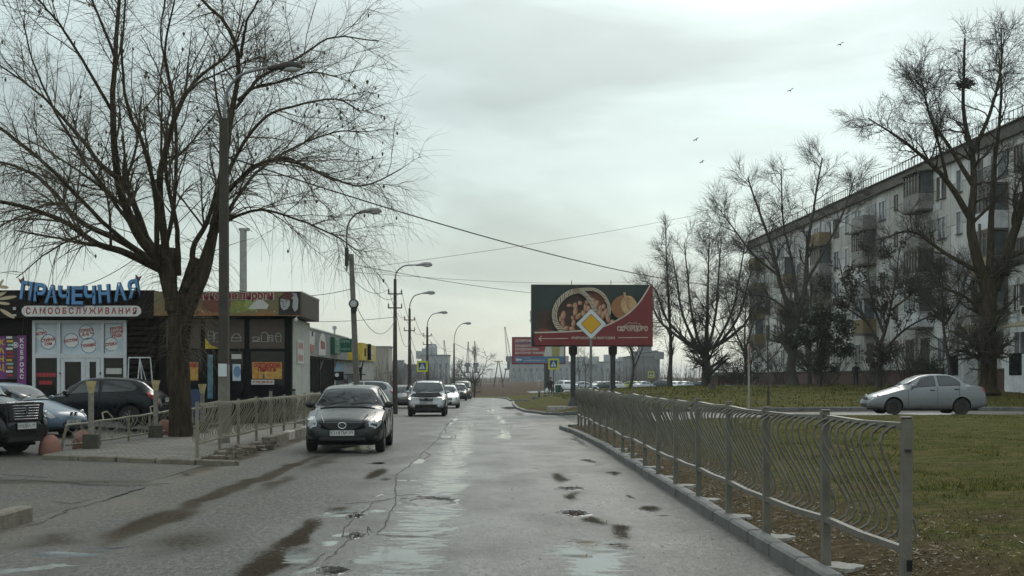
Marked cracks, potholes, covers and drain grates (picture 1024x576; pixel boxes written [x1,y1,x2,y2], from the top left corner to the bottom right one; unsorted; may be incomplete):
crack [9,472,195,504]
crack [300,475,442,569]
pothole [316,566,353,576]
pothole [555,509,593,517]
